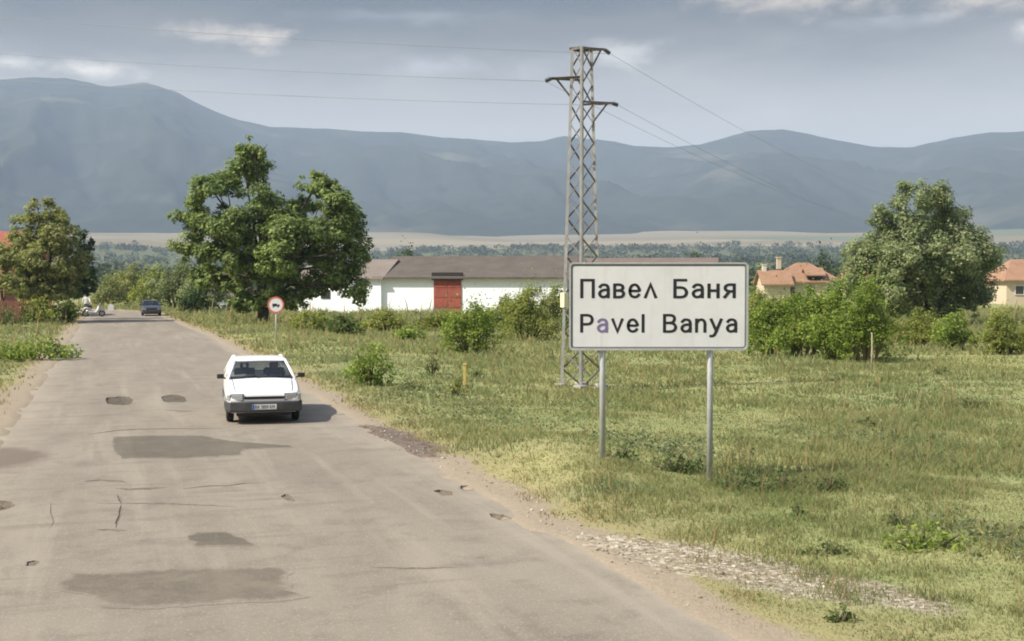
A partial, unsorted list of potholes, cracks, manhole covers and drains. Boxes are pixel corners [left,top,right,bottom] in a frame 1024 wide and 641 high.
pothole [105,396,133,405]
pothole [0,500,15,510]
crack [84,479,249,531]
